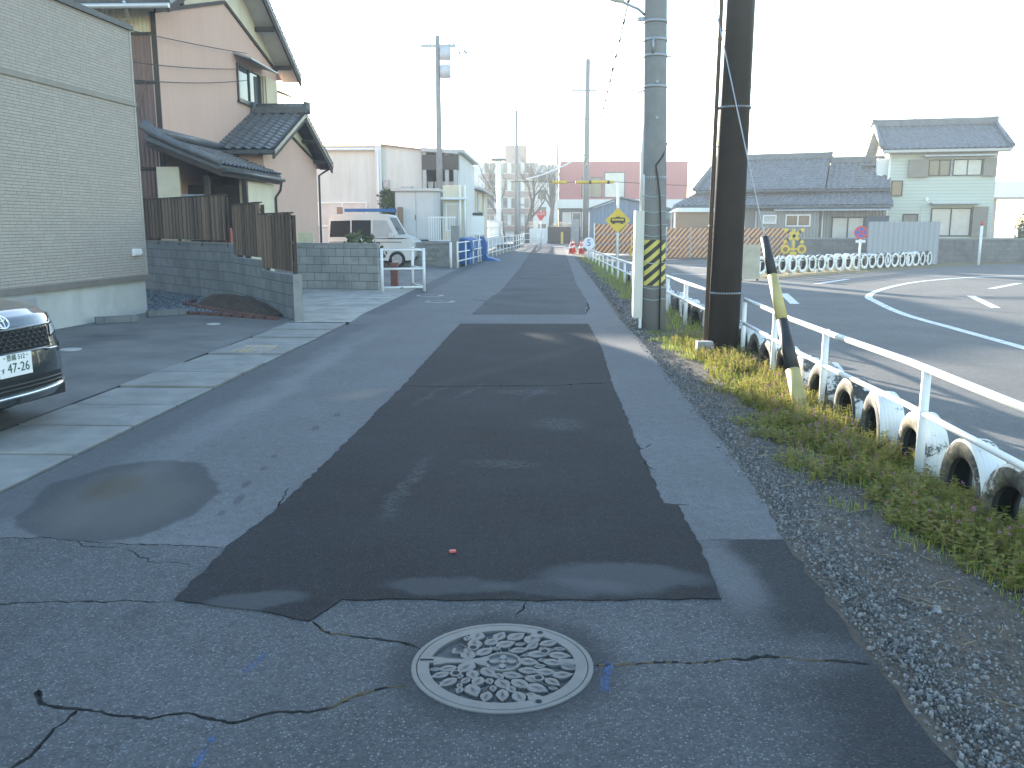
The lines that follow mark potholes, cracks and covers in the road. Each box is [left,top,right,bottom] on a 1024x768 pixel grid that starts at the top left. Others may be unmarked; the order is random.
manhole cover [411,623,594,714]
crack [593,654,870,666]
crack [11,685,412,768]
crack [312,621,420,649]
